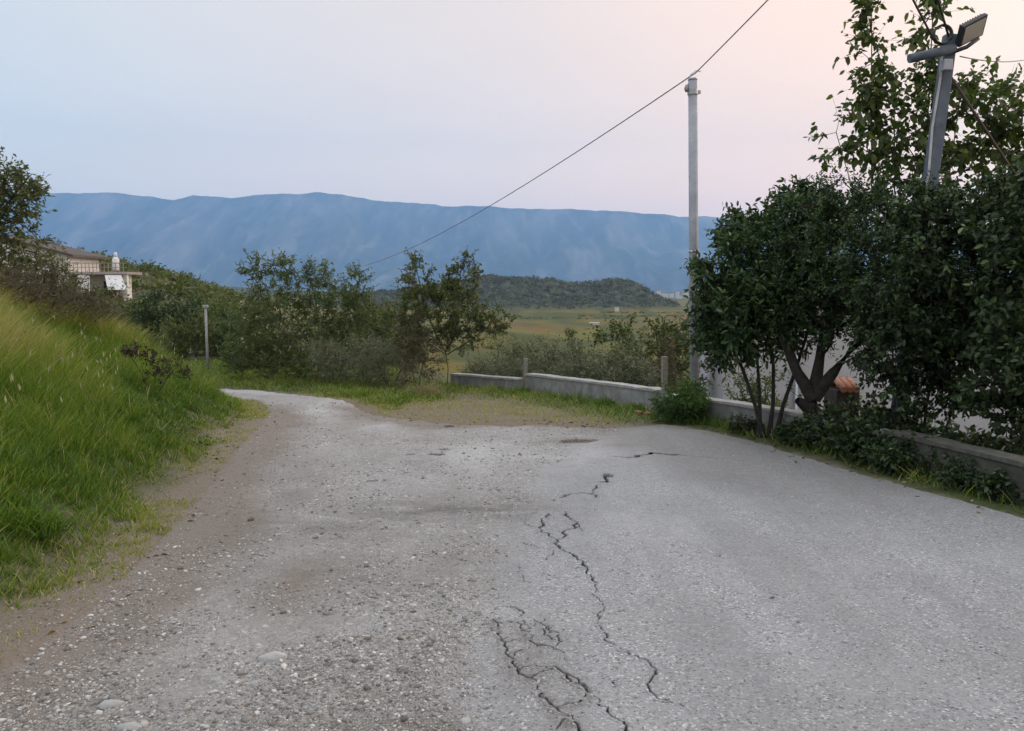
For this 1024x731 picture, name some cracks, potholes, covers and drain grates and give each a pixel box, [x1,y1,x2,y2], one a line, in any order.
crack [487,483,689,731]
